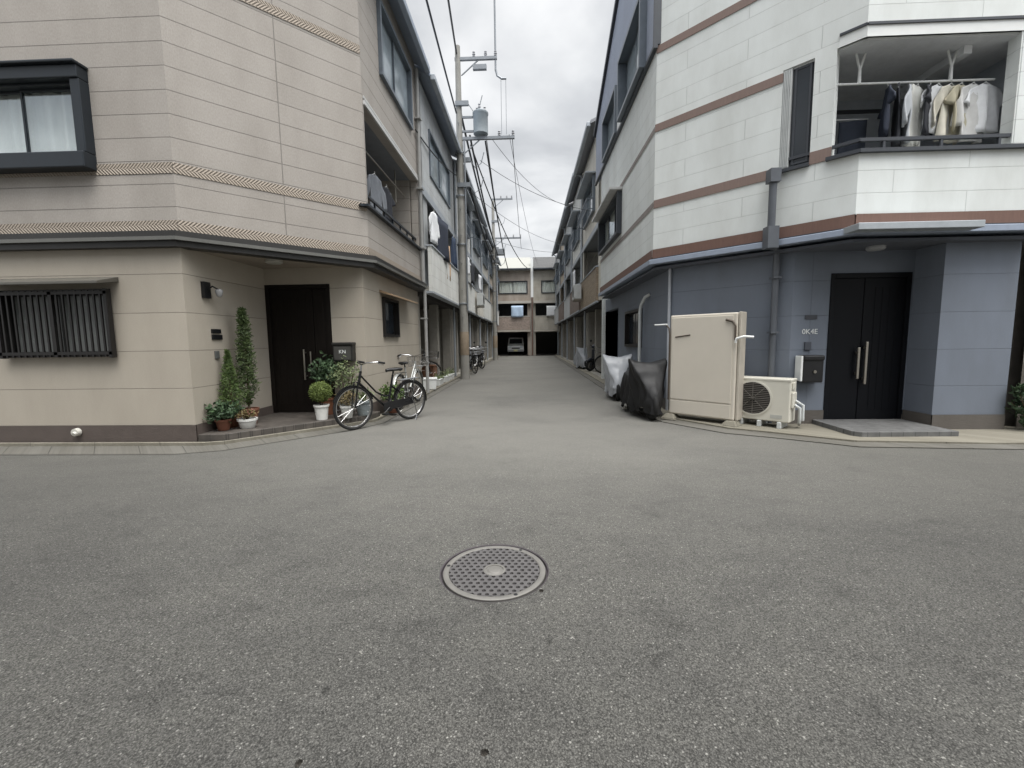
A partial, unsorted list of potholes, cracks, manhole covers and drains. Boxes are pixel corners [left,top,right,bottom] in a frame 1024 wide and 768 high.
manhole cover [439,544,549,603]
